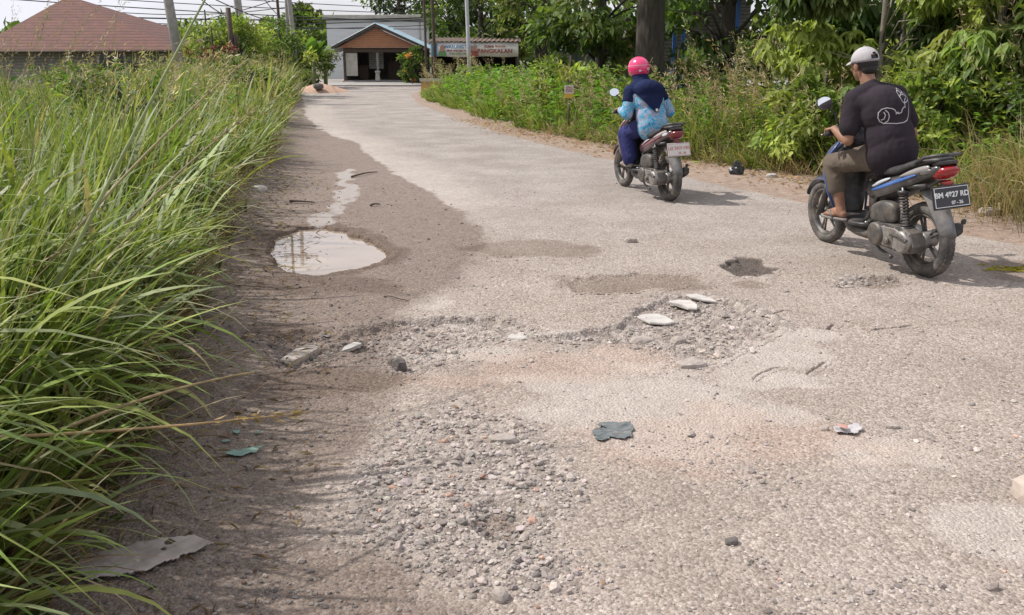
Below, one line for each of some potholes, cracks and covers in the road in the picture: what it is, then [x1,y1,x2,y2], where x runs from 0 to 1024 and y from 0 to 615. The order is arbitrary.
pothole [710,254,785,280]
pothole [254,224,402,278]
pothole [462,489,543,548]
pothole [520,292,789,373]
pothole [555,269,719,295]
pothole [259,314,552,376]
